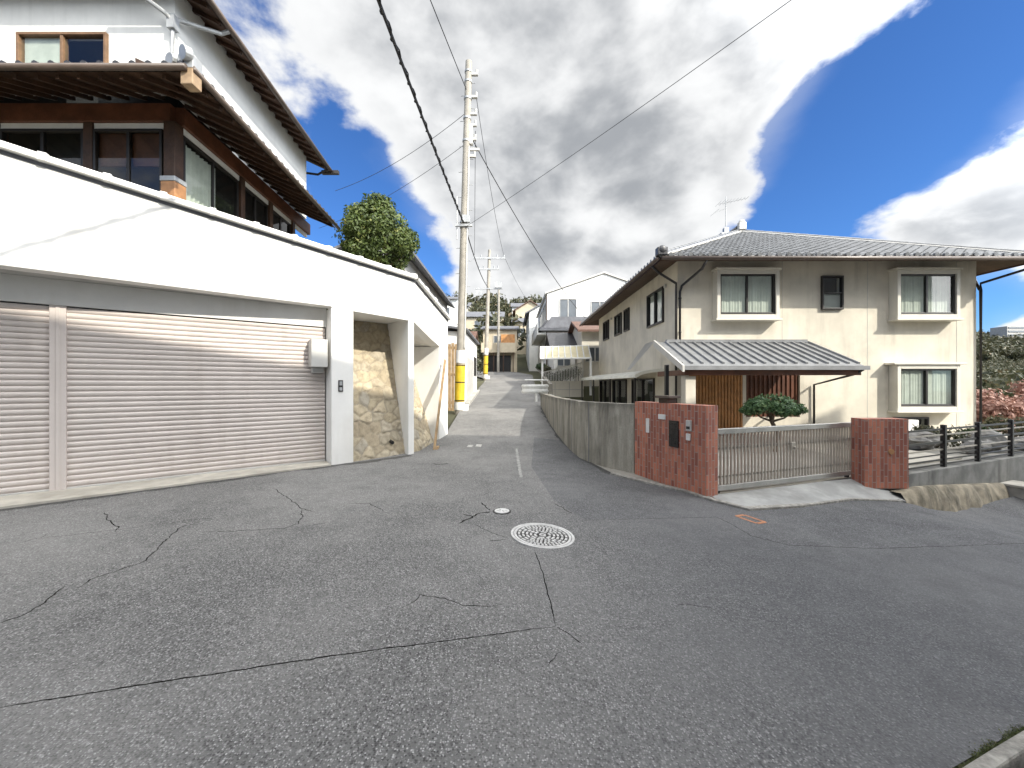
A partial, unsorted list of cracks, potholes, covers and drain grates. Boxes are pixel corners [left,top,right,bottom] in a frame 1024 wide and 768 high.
crack [459,503,505,541]
crack [402,594,501,608]
crack [1,586,65,623]
crack [20,490,327,588]
manhole cover [511,523,575,549]
